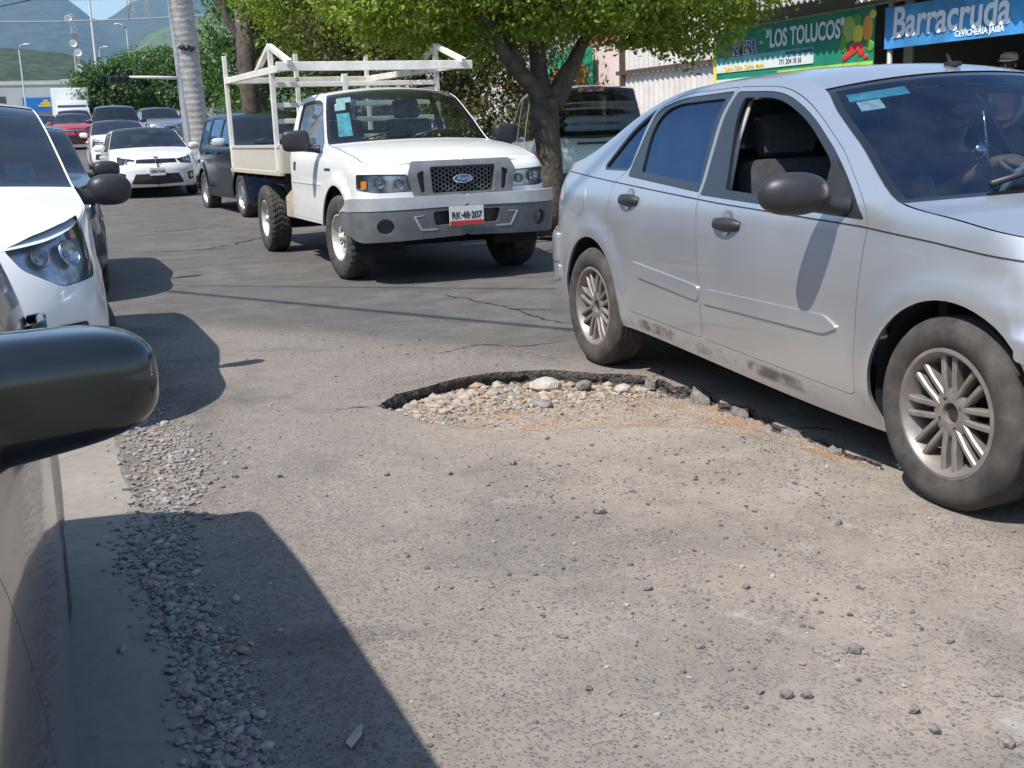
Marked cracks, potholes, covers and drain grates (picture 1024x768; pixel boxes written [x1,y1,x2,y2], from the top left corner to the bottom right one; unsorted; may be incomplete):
crack [442,294,565,323]
crack [154,225,260,252]
pothole [377,370,886,473]
crack [434,341,560,354]
